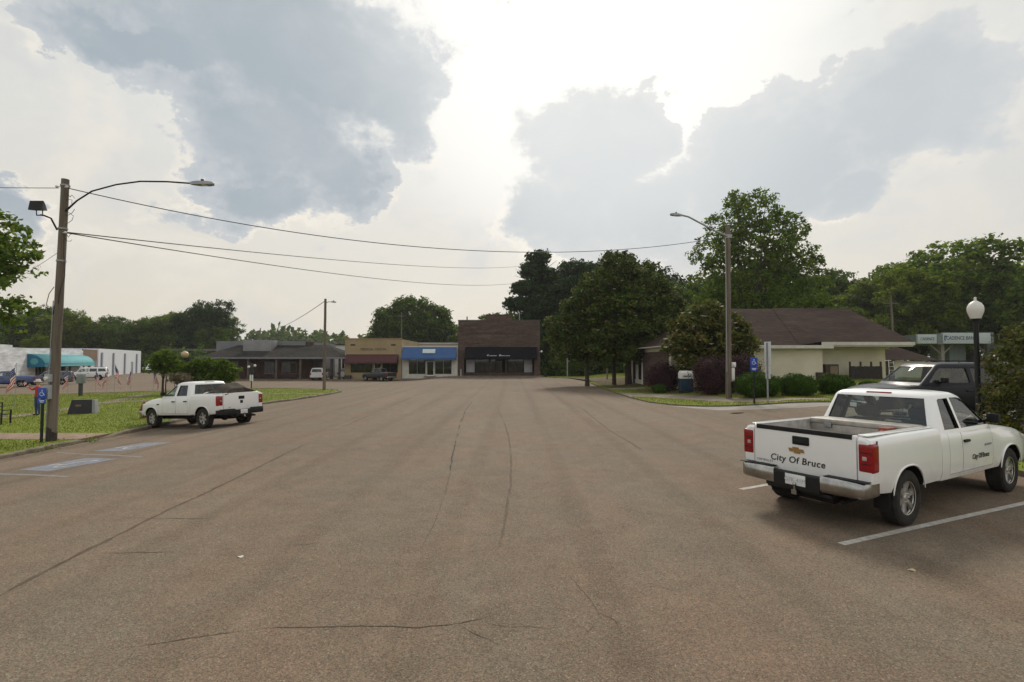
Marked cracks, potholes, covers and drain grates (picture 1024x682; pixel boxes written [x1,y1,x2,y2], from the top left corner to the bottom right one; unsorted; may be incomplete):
crack [31,616,564,679]
crack [497,407,512,547]
crack [565,403,641,449]
crack [422,395,472,547]
